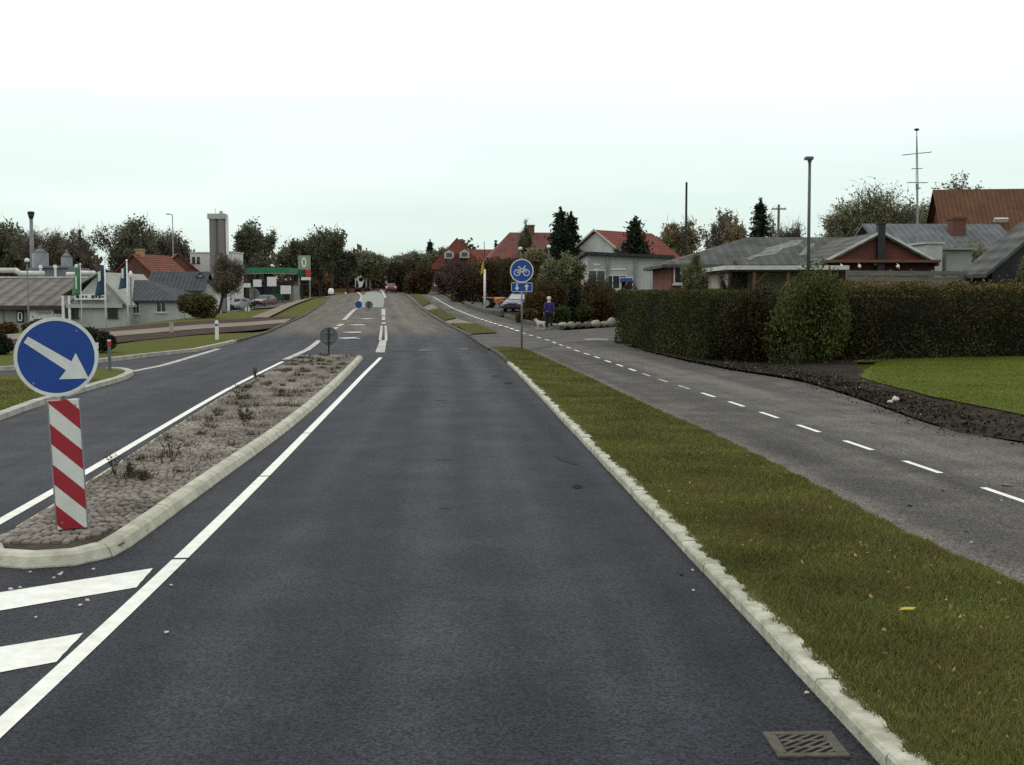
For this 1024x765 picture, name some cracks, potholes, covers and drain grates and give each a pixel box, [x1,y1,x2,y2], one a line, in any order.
drain grate [762,731,851,759]
